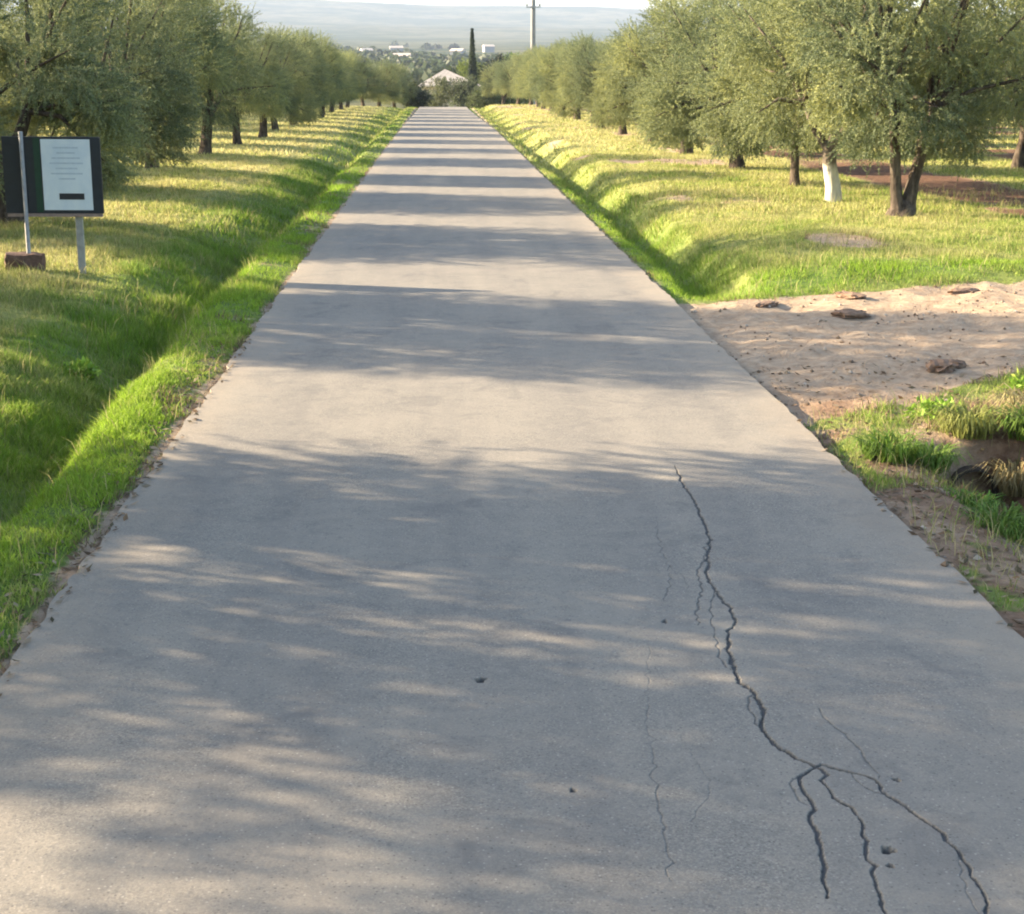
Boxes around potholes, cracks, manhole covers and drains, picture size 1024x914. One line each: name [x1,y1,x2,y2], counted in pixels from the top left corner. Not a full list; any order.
crack [641,465,994,914]
